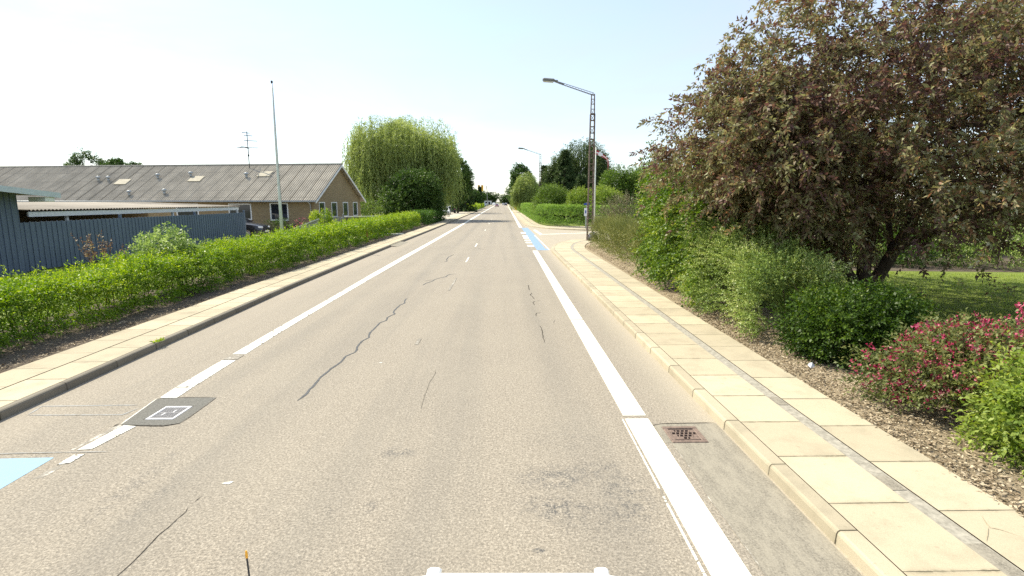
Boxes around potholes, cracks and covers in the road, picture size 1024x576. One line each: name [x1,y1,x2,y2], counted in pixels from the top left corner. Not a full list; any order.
crack [117,497,200,576]
drain grate [662,426,709,443]
